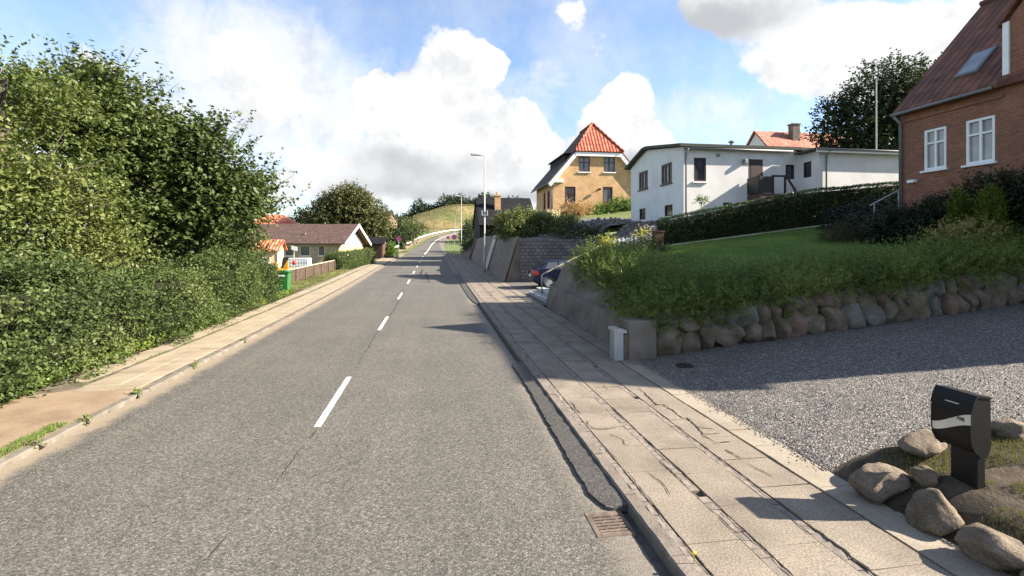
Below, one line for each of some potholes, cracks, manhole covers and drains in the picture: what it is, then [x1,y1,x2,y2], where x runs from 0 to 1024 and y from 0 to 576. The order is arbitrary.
crack [638,387,771,476]
crack [205,429,317,560]
drain grate [584,510,636,538]
